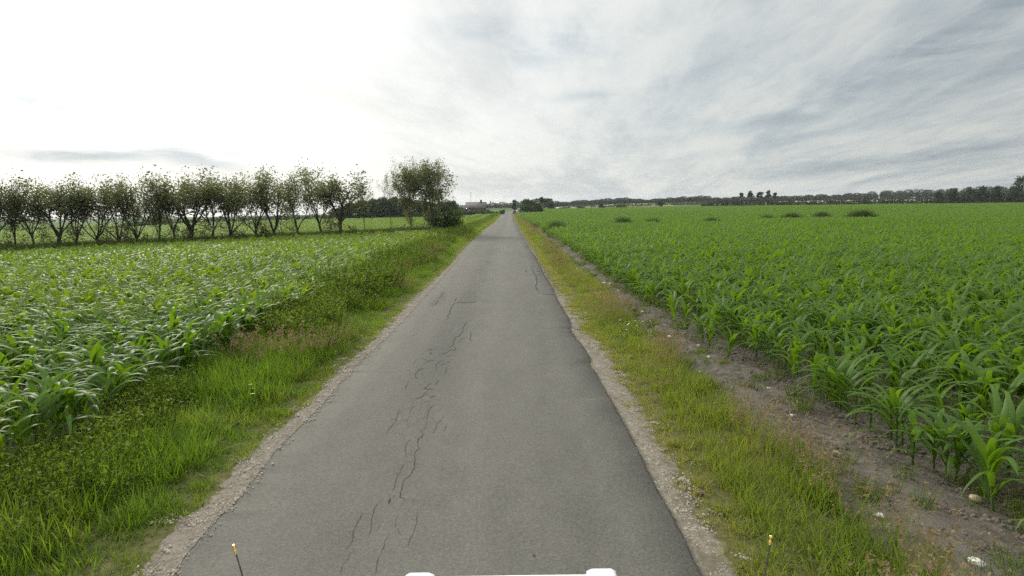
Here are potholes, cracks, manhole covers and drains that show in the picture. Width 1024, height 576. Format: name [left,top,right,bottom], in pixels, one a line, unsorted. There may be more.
crack [340,293,476,575]
